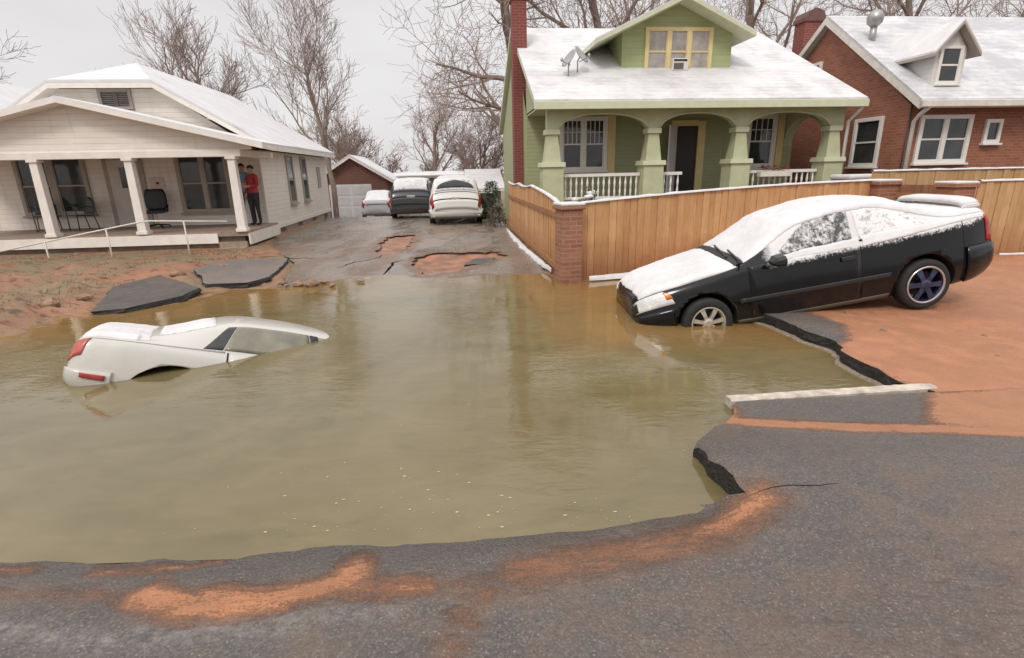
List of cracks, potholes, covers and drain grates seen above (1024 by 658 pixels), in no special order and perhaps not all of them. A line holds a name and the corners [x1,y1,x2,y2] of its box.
pothole [411,251,508,275]
crack [345,255,401,274]
crack [759,483,836,492]
pothole [375,235,415,254]
